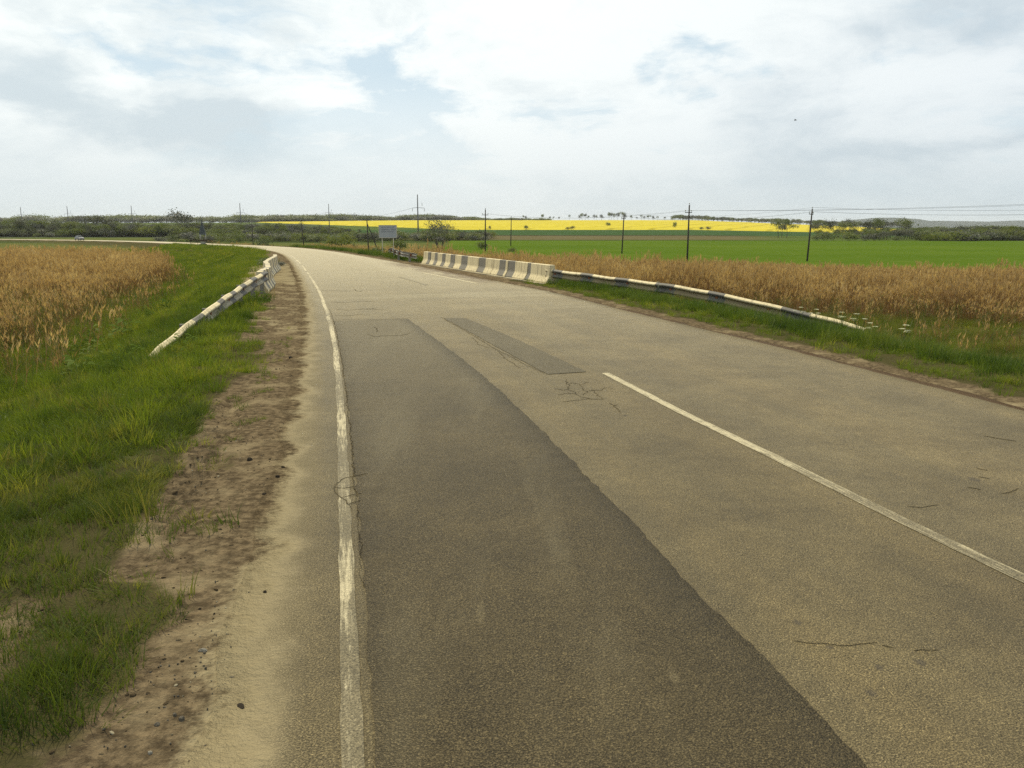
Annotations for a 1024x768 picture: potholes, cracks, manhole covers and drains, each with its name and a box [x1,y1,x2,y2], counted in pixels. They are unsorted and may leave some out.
crack [794,640,893,648]
crack [333,473,367,509]
crack [559,382,619,410]
